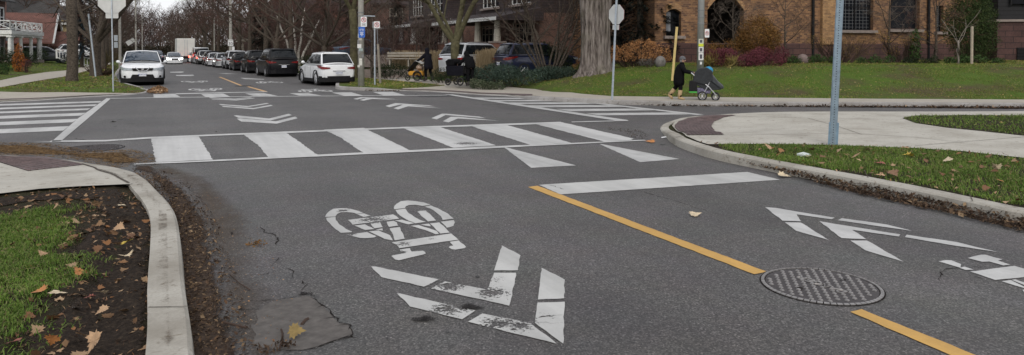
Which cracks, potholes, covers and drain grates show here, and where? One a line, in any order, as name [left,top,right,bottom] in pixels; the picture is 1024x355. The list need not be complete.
crack [238,226,359,350]
manhole cover [760,267,886,306]
